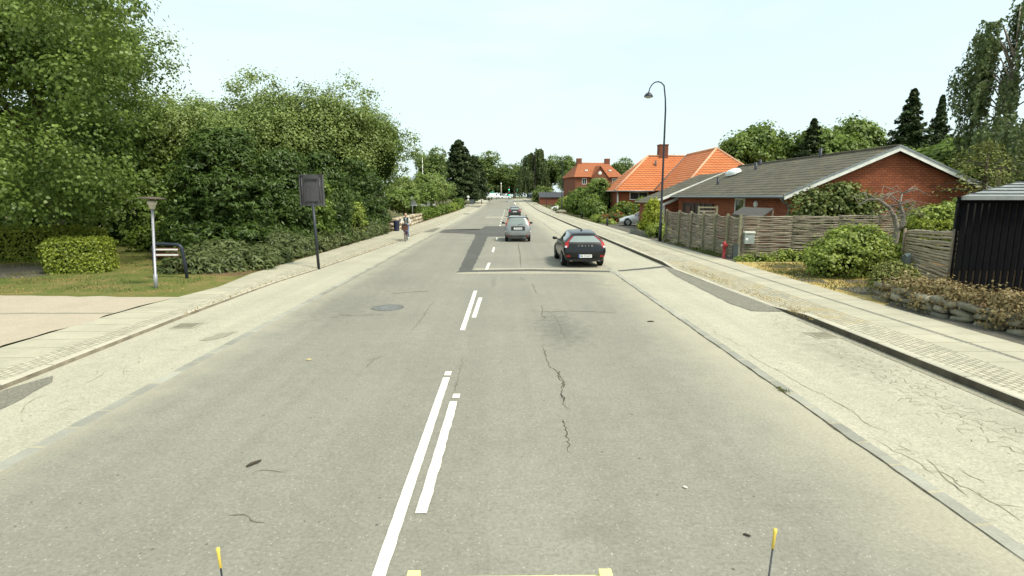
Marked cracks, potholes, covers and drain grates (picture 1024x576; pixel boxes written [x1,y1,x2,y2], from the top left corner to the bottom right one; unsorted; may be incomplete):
crack [761,311,1024,471]
crack [518,245,593,451]
crack [832,400,1020,520]
